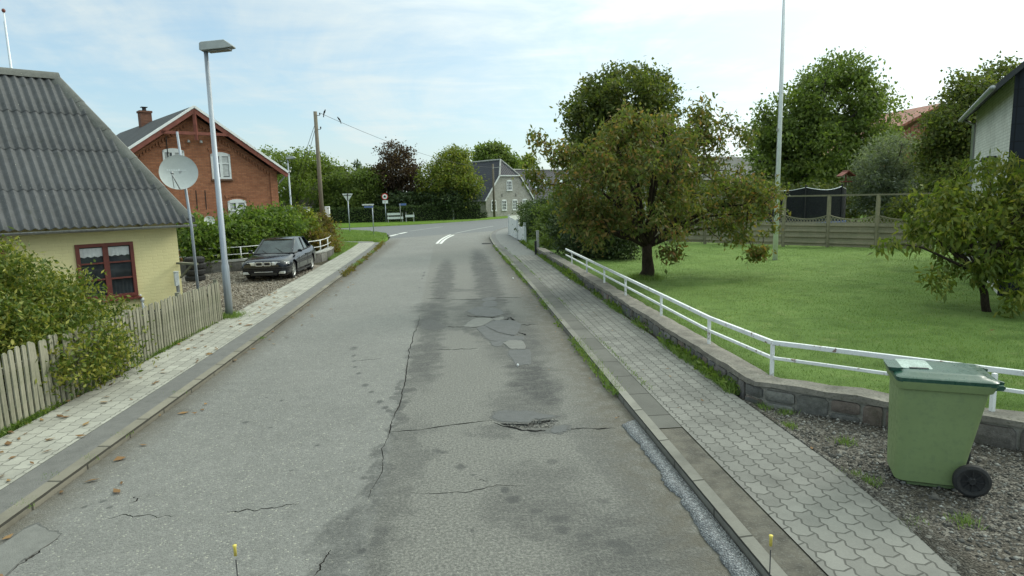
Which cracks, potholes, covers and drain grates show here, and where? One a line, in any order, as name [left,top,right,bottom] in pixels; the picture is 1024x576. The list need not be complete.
crack [389,420,609,433]
crack [411,479,514,494]
pothole [500,419,558,428]
crack [109,496,172,519]
